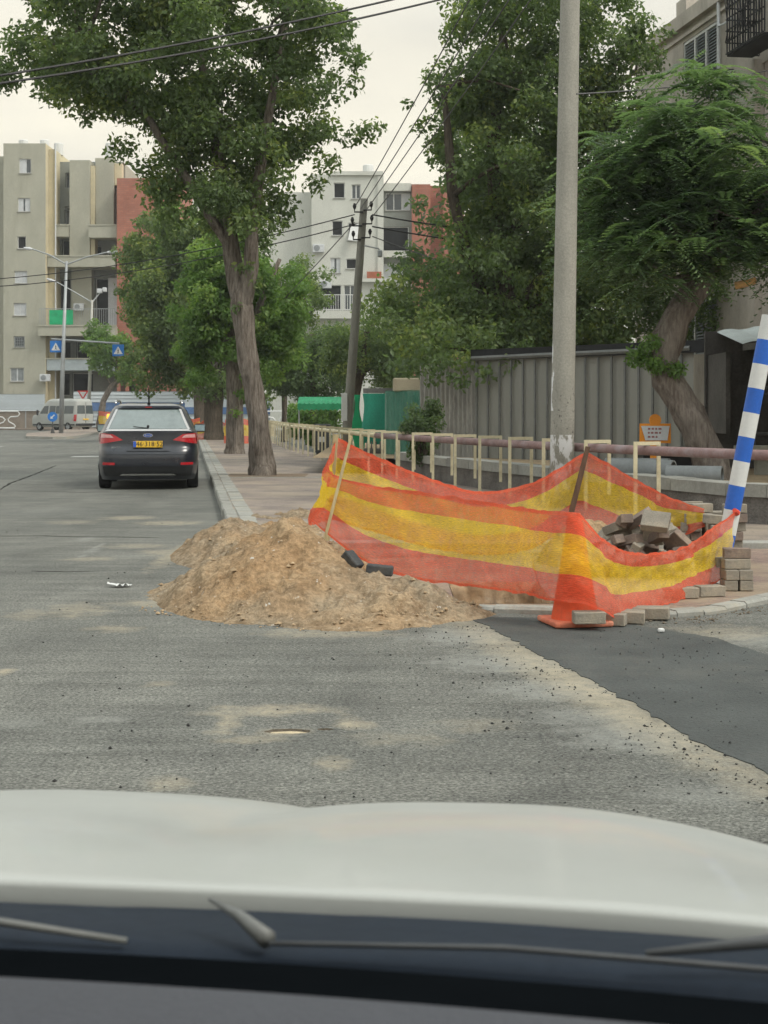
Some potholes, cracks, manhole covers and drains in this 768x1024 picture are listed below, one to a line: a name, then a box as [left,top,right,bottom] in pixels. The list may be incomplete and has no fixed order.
crack [0,466,89,493]
